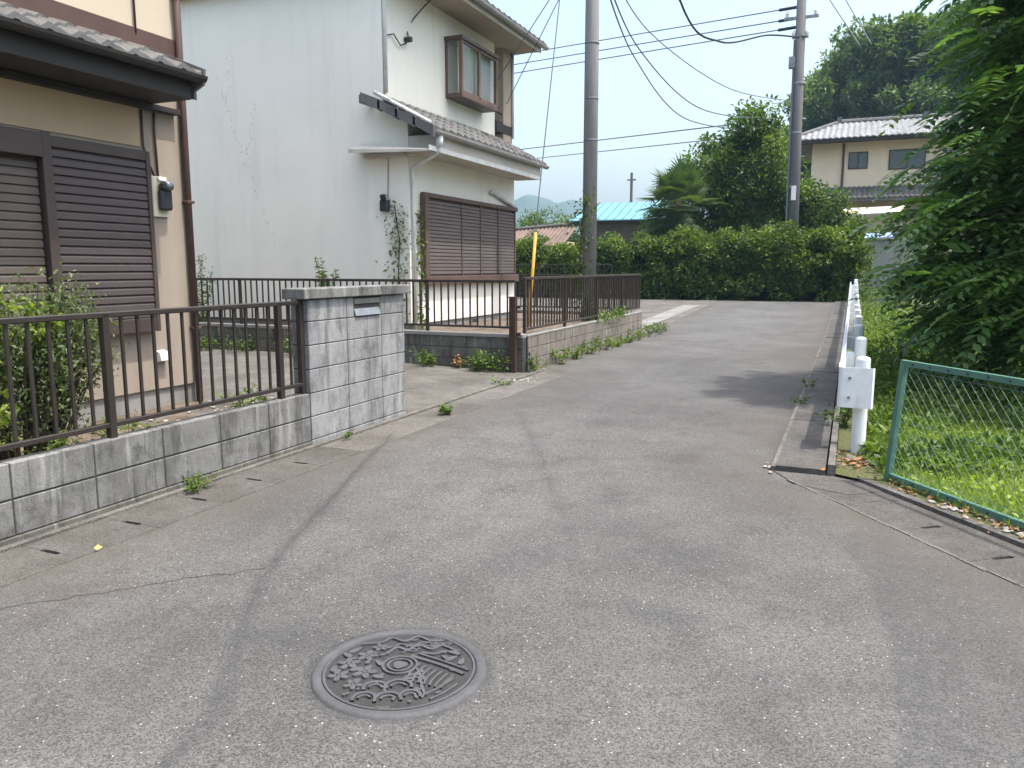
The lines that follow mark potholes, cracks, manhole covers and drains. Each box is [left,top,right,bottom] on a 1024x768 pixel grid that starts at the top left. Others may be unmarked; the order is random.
crack [0,432,392,621]
manhole cover [310,629,487,720]
